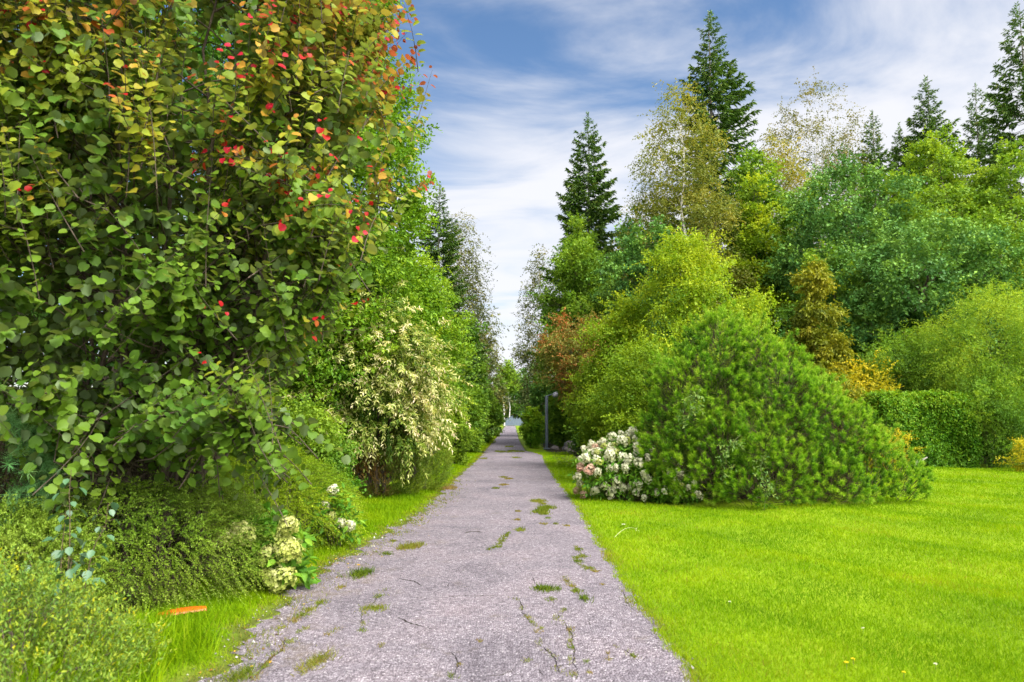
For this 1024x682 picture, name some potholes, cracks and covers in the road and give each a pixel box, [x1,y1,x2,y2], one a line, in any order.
crack [513,551,590,677]
